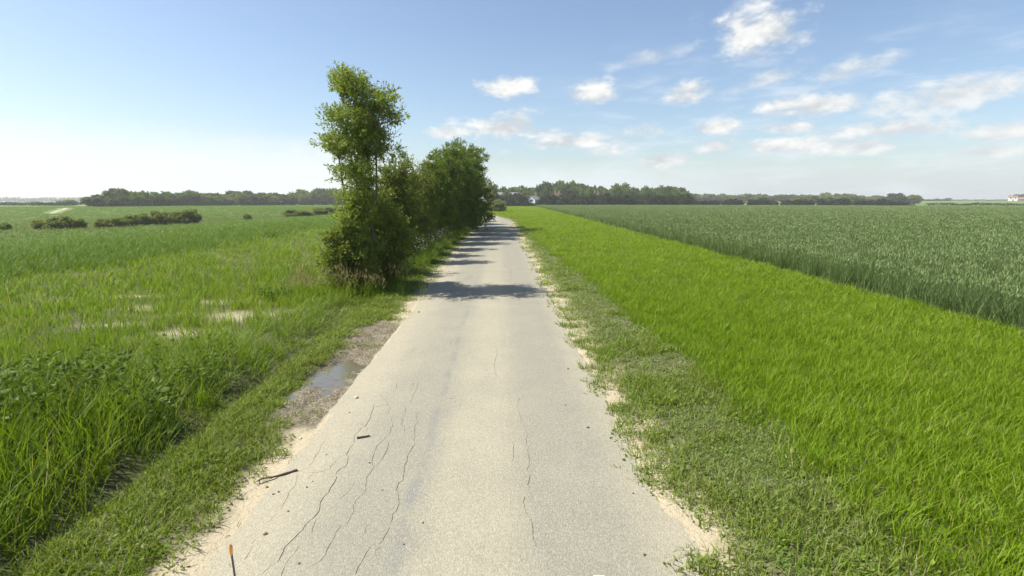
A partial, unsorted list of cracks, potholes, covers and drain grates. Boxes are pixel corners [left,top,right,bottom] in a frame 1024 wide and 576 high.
crack [512,408,537,546]
crack [245,384,419,576]
